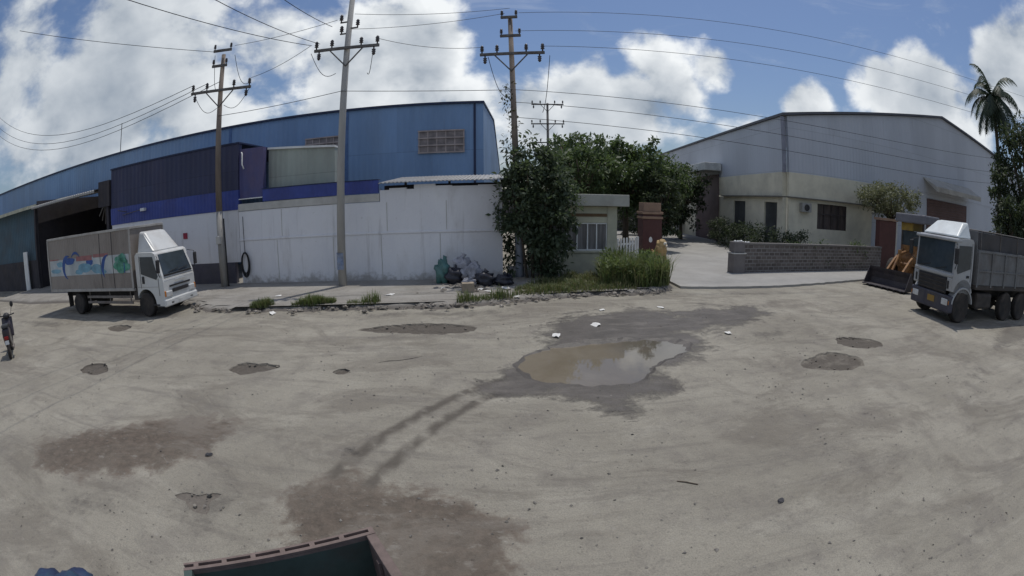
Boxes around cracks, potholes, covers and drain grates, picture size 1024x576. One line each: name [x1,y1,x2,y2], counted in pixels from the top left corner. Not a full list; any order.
pothole [512,337,693,387]
pothole [229,362,280,375]
pothole [175,492,221,514]
pothole [835,337,883,349]
pothole [800,352,865,371]
pothole [359,323,477,335]
pothole [80,363,108,375]
